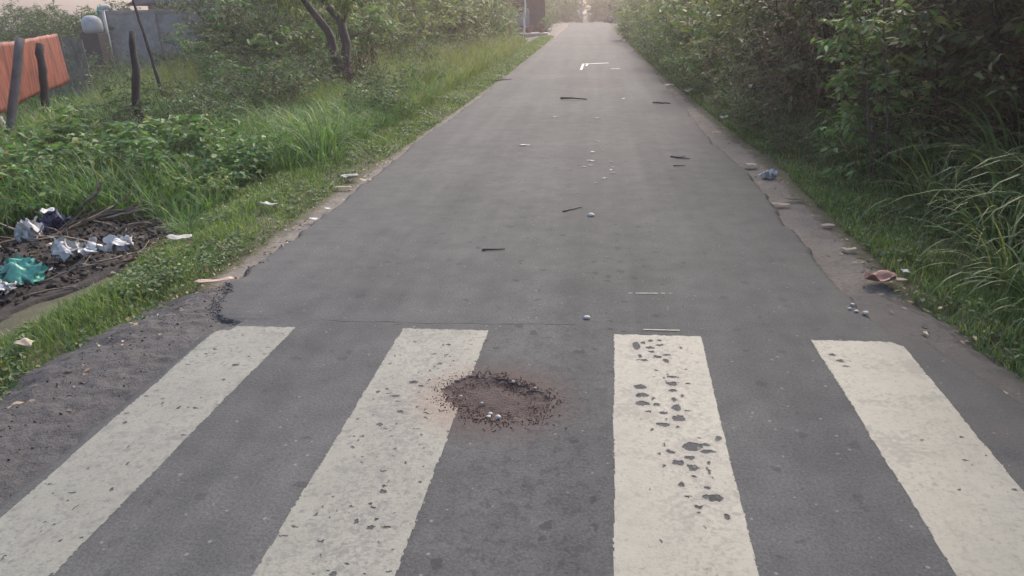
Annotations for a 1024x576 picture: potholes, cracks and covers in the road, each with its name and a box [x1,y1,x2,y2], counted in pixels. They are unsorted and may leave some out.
pothole [443,376,550,422]
